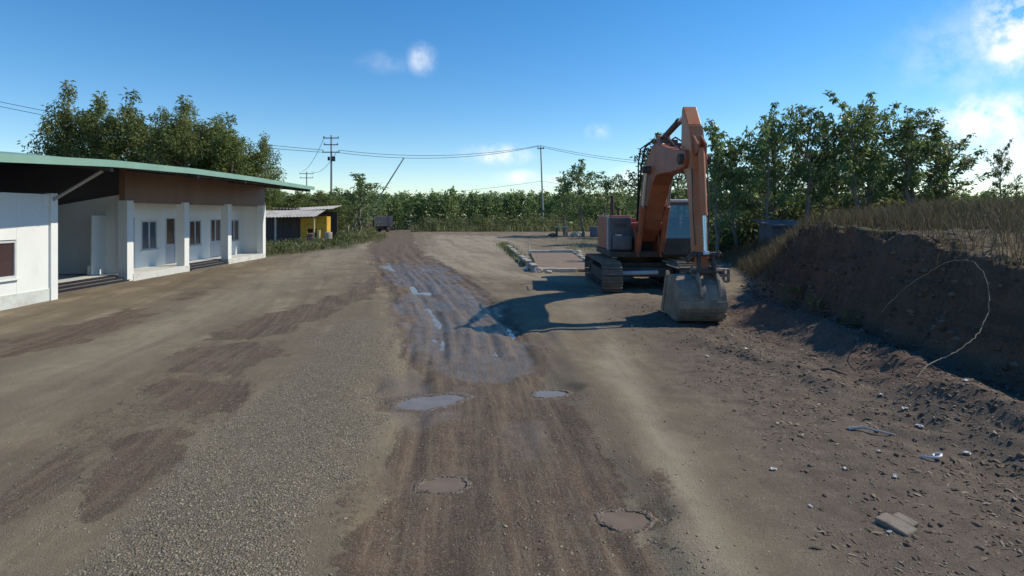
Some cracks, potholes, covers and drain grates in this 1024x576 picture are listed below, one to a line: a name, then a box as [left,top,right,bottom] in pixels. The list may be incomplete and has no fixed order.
pothole [385,392,475,413]
pothole [594,508,658,533]
pothole [412,475,473,495]
pothole [530,389,573,399]
